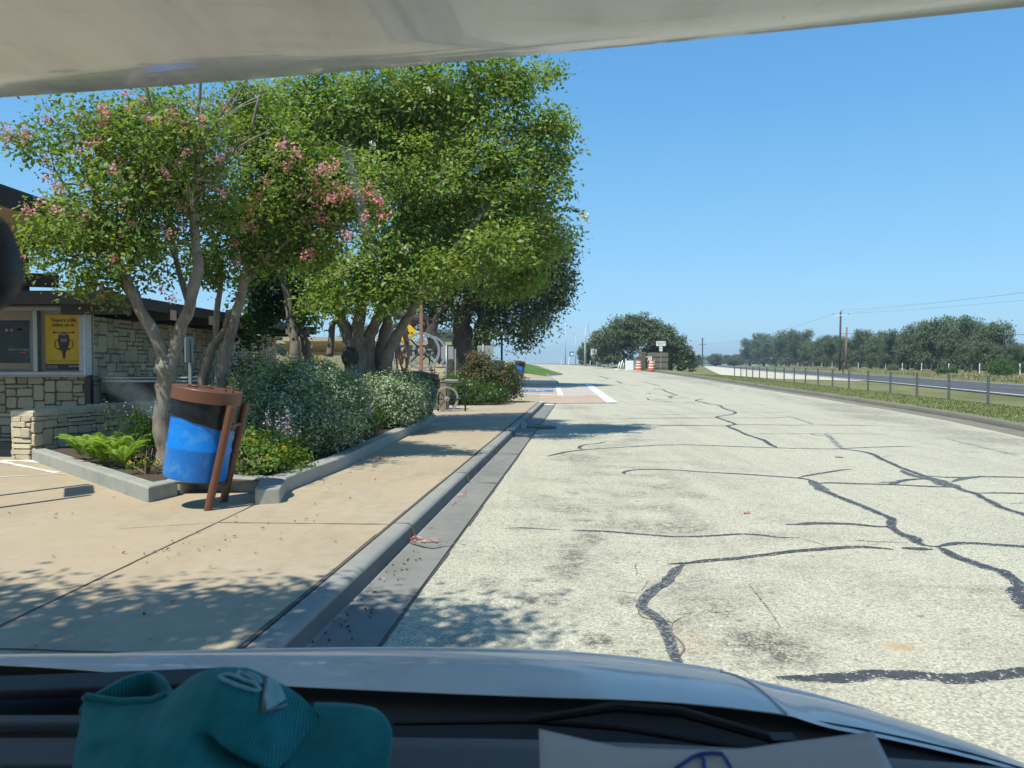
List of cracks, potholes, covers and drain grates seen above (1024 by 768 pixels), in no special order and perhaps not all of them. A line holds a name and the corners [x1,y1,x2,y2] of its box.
crack [549,376,1024,663]
